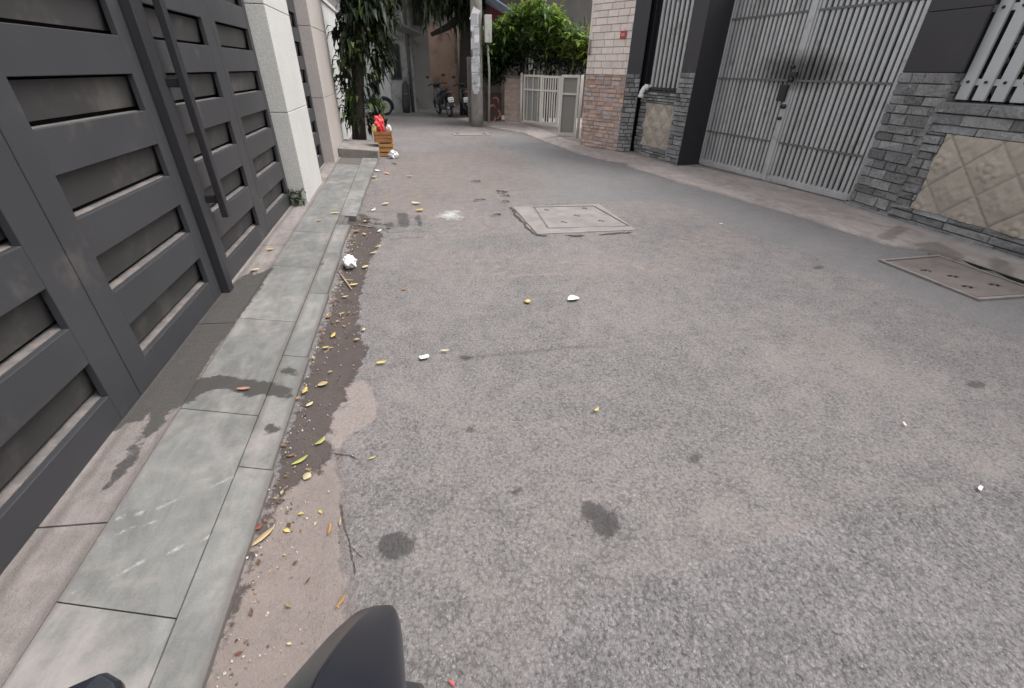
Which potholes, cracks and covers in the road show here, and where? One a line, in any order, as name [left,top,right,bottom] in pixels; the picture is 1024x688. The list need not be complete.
crack [340,504,363,576]
manhole cover [878,254,1024,301]
manhole cover [513,204,636,234]
